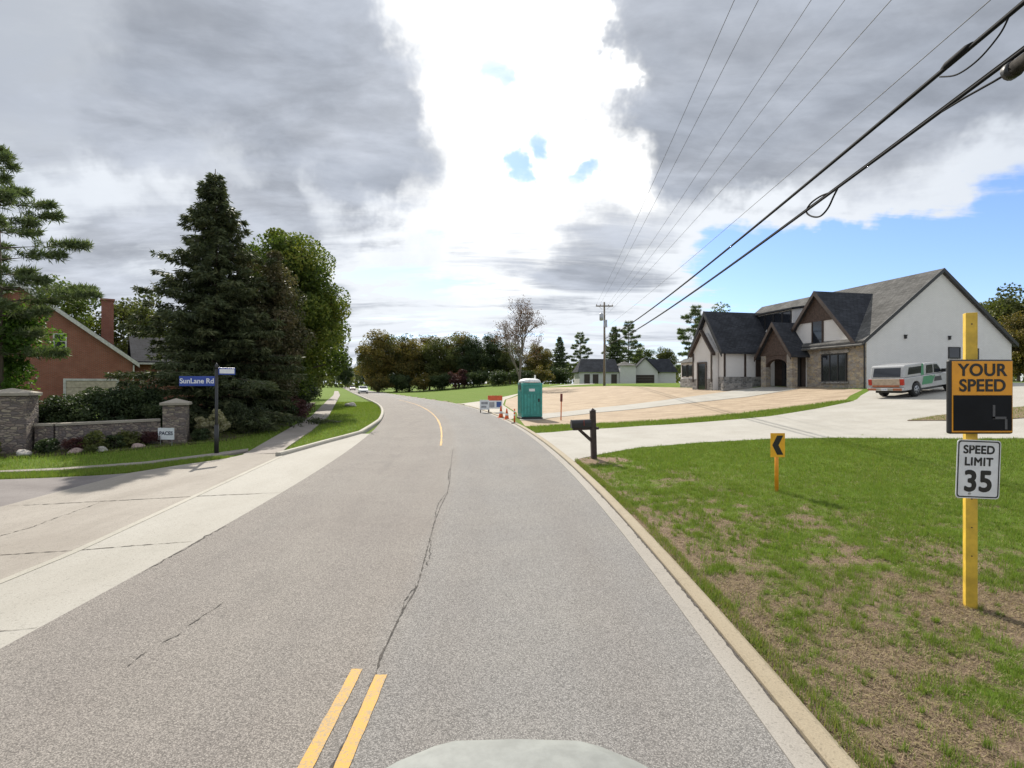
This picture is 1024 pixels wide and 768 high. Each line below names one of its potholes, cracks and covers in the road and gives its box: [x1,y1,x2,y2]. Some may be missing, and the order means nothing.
crack [330,452,453,768]
